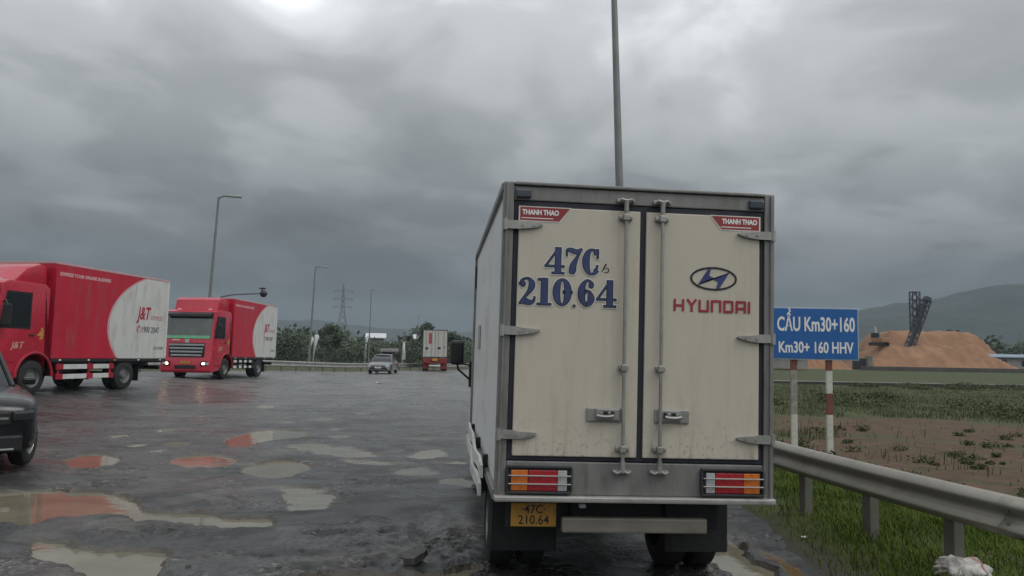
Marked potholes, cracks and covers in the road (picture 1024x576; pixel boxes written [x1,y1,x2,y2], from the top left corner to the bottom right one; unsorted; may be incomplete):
pothole [61,453,122,468]
pothole [167,454,239,468]
pothole [406,448,449,459]
pothole [239,458,313,478]
pothole [26,537,175,576]
pothole [436,476,476,488]
pothole [275,486,341,512]
pothole [389,466,443,476]
pothole [222,429,312,447]
pothole [0,487,278,528]
pothole [282,443,383,458]
pothole [297,562,484,576]
